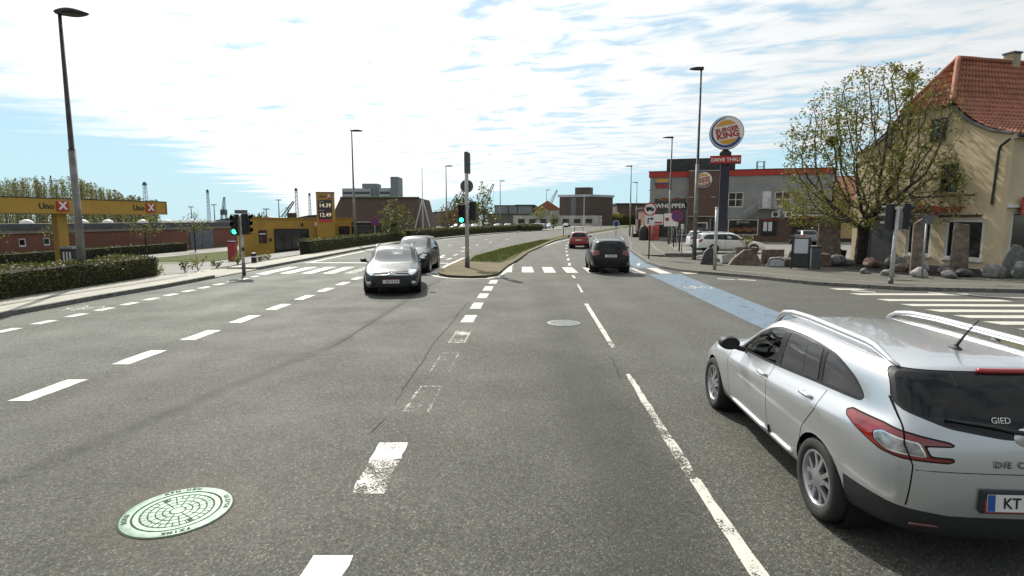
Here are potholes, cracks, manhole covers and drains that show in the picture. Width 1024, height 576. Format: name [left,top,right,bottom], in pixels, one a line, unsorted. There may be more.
manhole cover [116,487,234,540]
